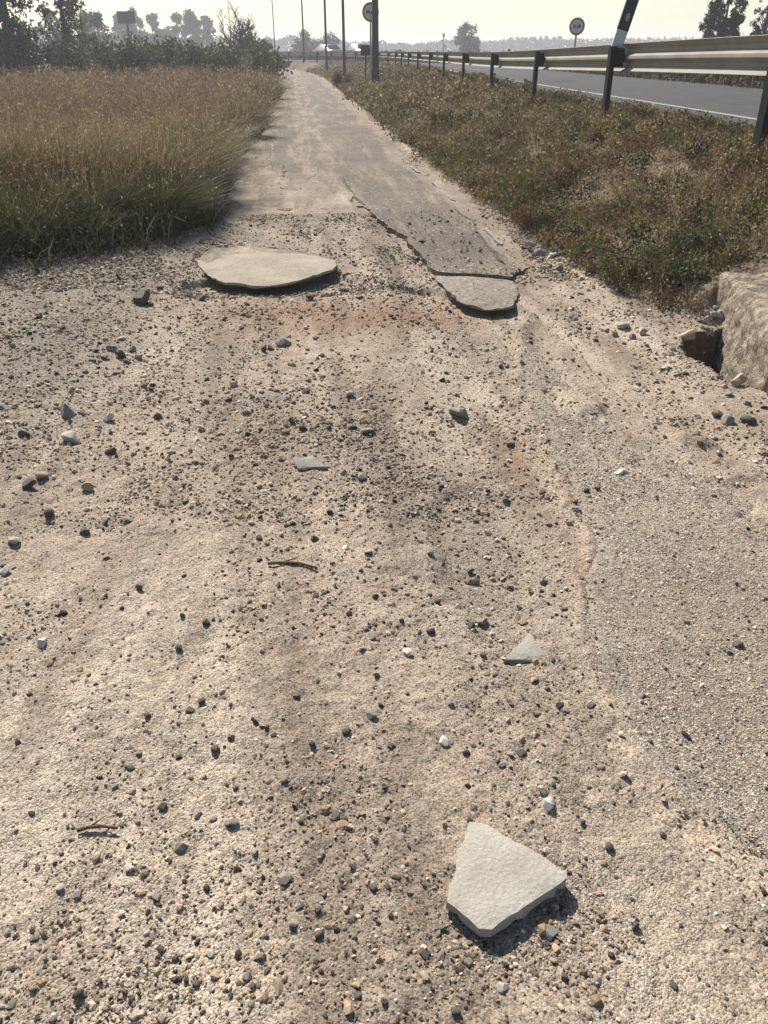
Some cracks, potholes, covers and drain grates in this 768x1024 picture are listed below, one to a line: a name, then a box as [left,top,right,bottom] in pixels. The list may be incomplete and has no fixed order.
crack [342,176,364,204]
pothole [680,329,723,369]
crack [455,209,505,263]
